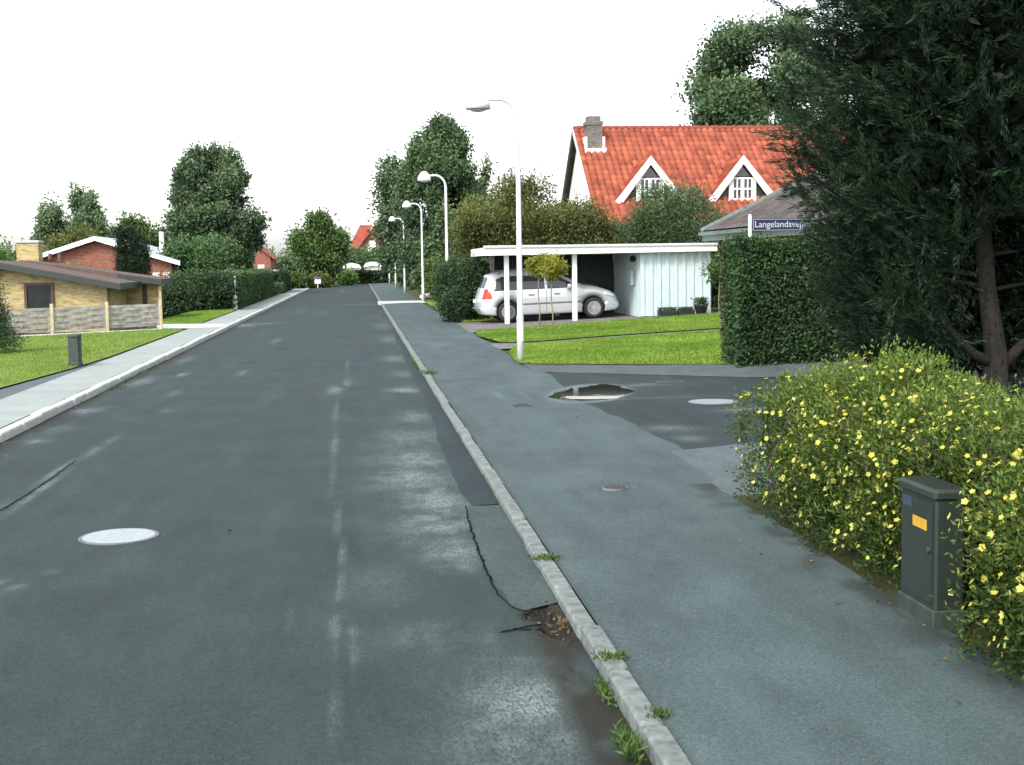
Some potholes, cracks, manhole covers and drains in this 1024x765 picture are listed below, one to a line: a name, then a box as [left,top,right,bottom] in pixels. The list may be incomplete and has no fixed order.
crack [465,505,543,633]
pothole [519,604,578,646]
manhole cover [78,528,160,545]
